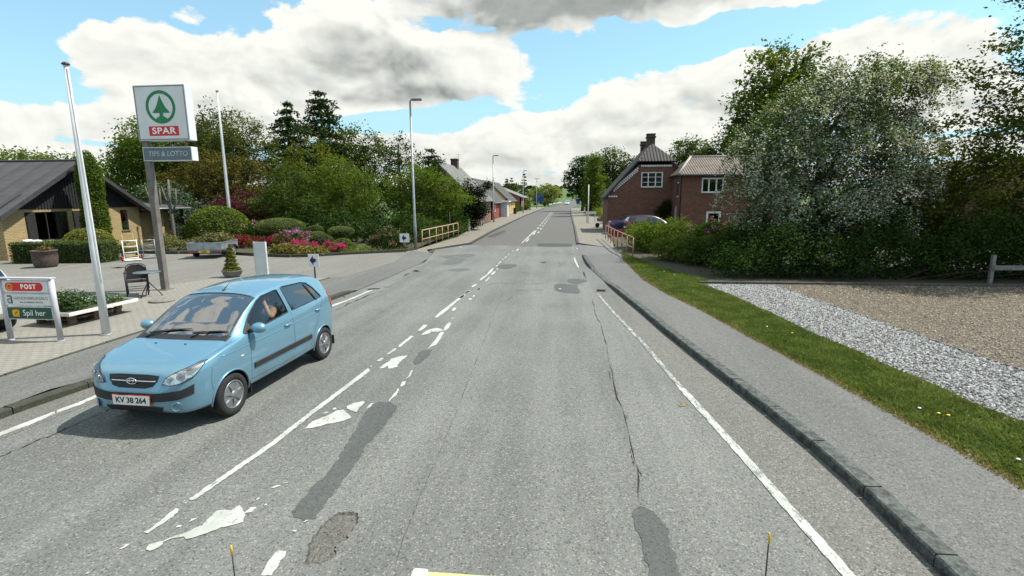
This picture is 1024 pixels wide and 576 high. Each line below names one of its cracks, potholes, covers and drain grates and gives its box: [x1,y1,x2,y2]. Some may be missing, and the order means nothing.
pothole [305,512,359,565]
crack [592,301,642,504]
